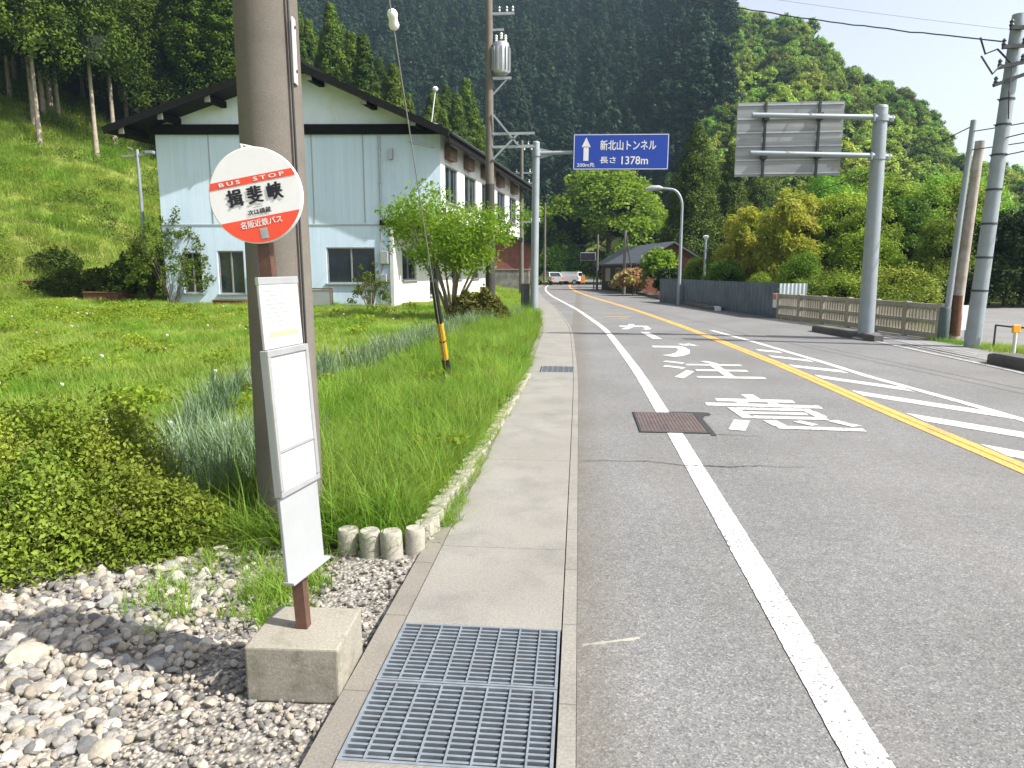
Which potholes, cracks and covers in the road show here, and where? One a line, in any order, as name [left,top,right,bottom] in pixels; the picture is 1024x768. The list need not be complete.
drain grate [376,622,560,693]
drain grate [336,680,557,768]
manhole cover [632,412,717,436]
